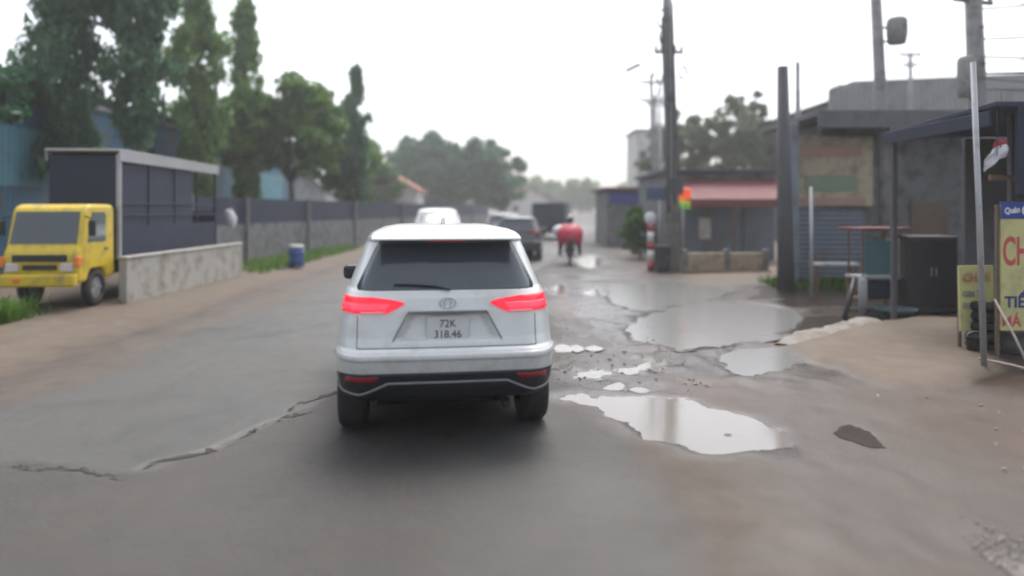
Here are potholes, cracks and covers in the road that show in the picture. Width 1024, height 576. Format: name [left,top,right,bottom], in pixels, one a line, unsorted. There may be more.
pothole [553,335,614,354]
crack [142,448,217,469]
crack [655,344,741,353]
crack [12,465,123,480]
pothole [578,378,629,391]
crack [239,391,337,439]
